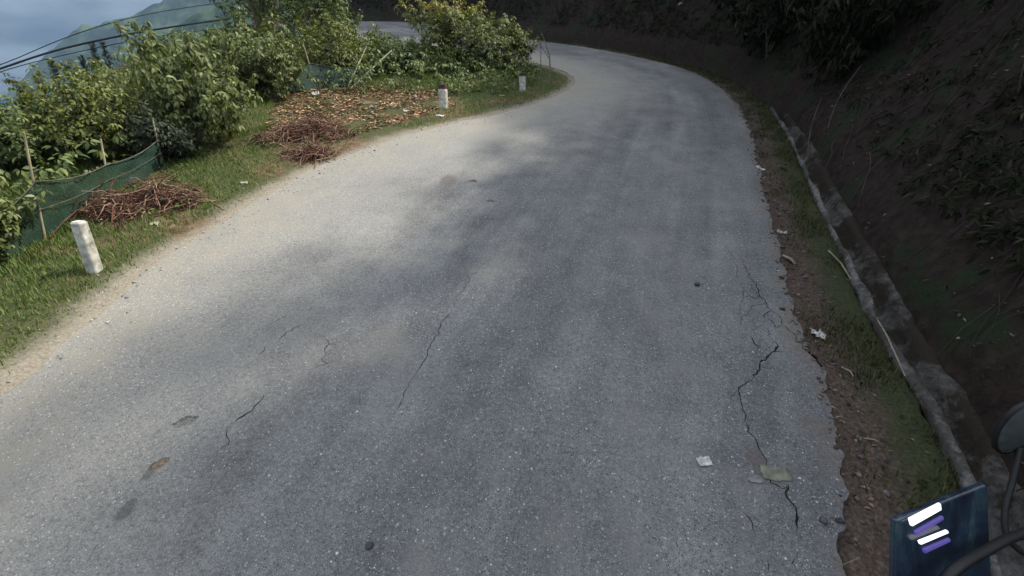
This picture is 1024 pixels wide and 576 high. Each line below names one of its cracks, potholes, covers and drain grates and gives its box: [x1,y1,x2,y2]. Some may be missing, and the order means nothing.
crack [217,396,264,452]
crack [396,269,479,412]
crack [728,249,823,571]
